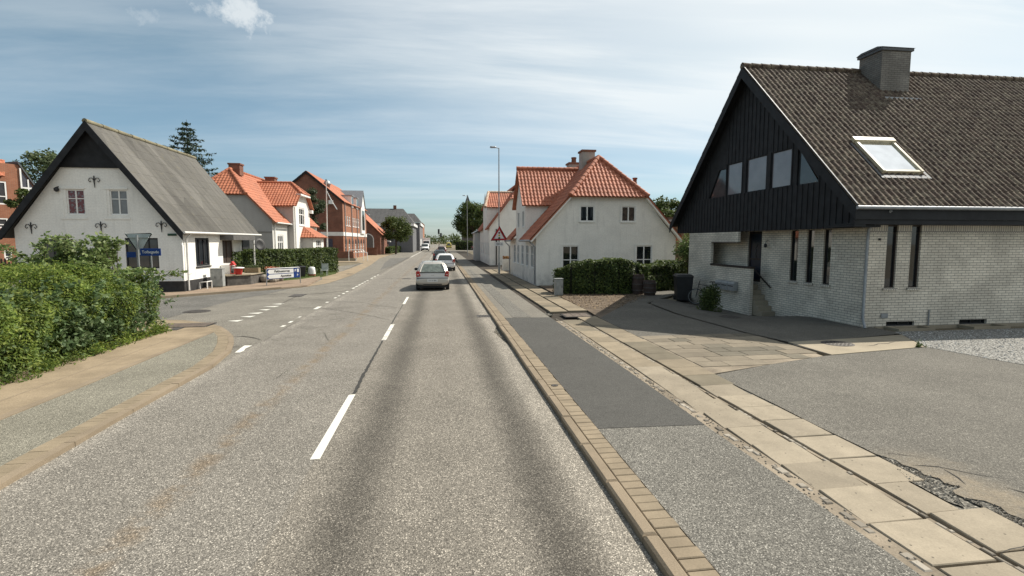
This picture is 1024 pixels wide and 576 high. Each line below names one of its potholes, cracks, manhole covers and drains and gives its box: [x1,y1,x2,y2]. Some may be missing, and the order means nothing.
crack [881,452,1022,492]
